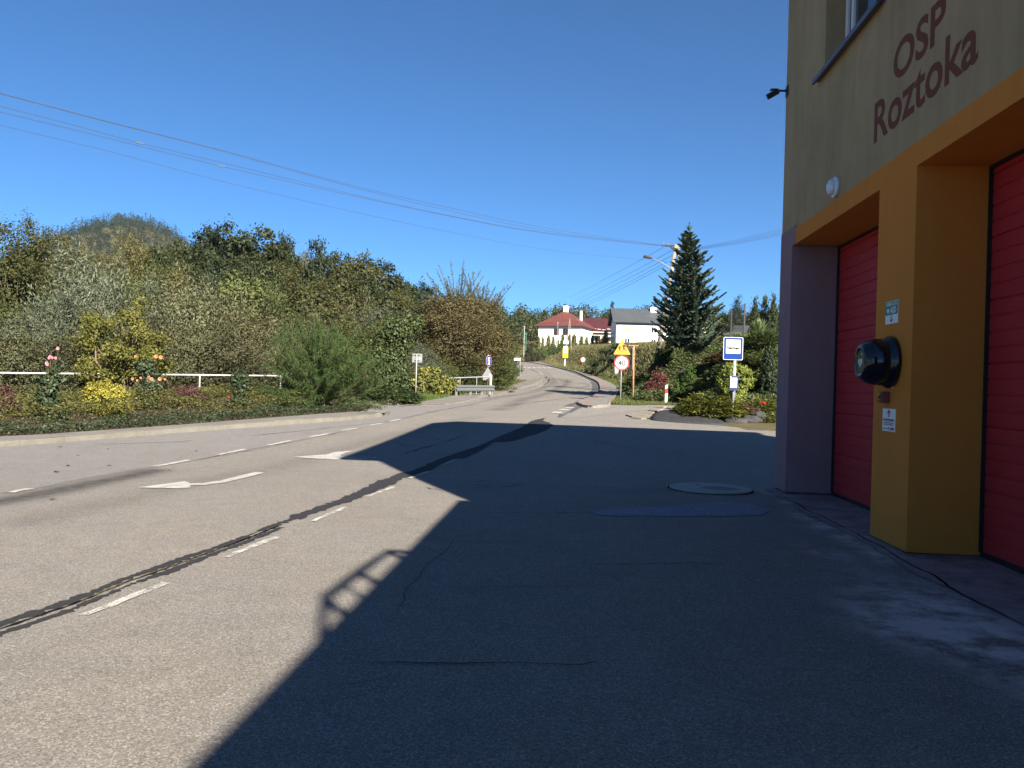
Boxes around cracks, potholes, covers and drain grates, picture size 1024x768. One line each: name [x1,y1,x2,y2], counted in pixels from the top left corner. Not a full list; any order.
manhole cover [668,482,754,495]
crack [330,661,595,685]
crack [396,533,571,611]
